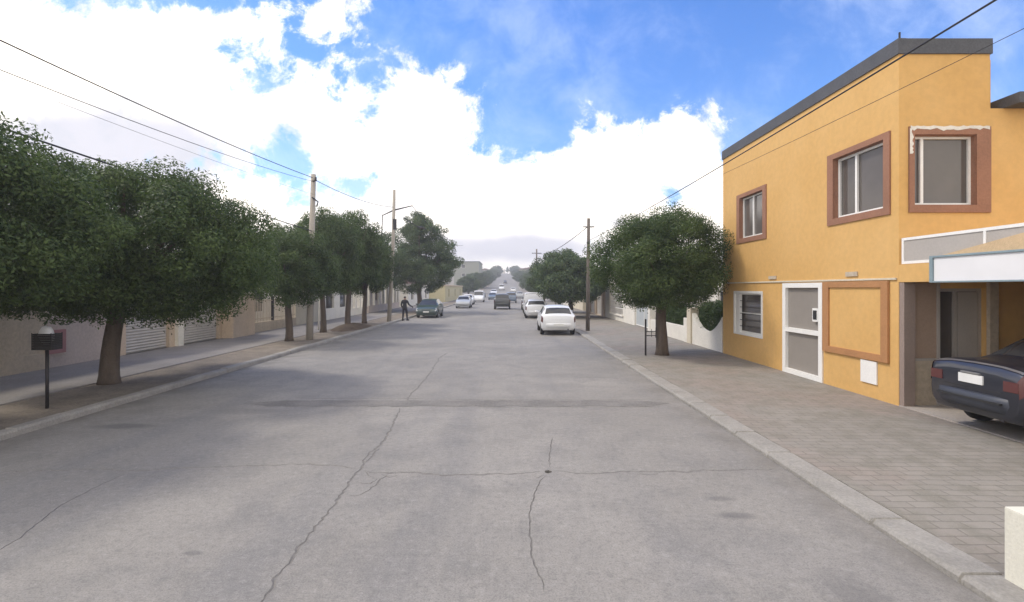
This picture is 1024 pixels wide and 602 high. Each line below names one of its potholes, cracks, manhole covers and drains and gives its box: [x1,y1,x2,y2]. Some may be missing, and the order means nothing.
crack [0,353,771,602]
